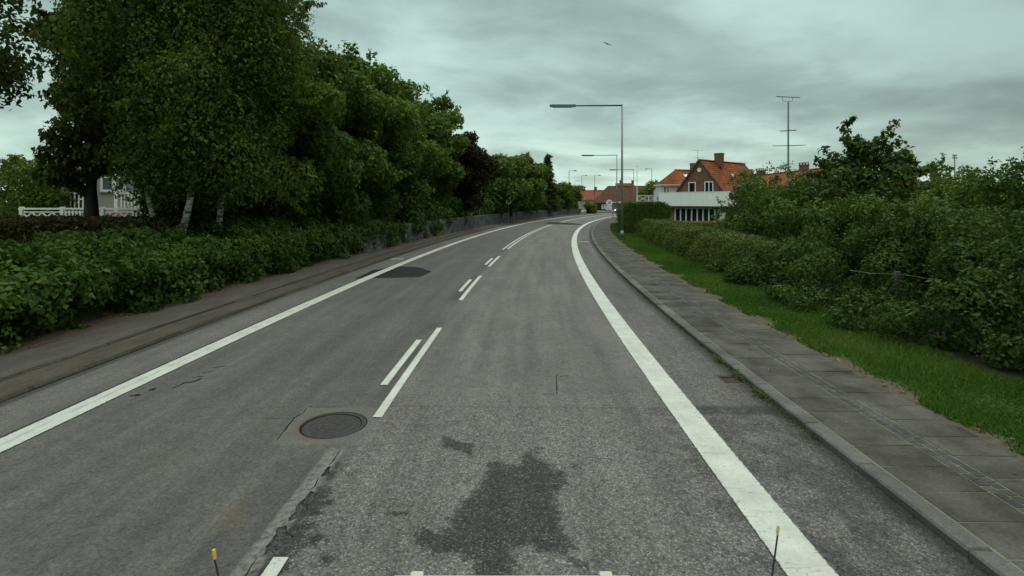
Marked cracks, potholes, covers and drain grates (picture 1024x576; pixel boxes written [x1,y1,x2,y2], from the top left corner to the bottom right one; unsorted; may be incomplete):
manhole cover [299,412,368,439]
drain grate [716,376,746,384]
crack [247,406,311,441]
